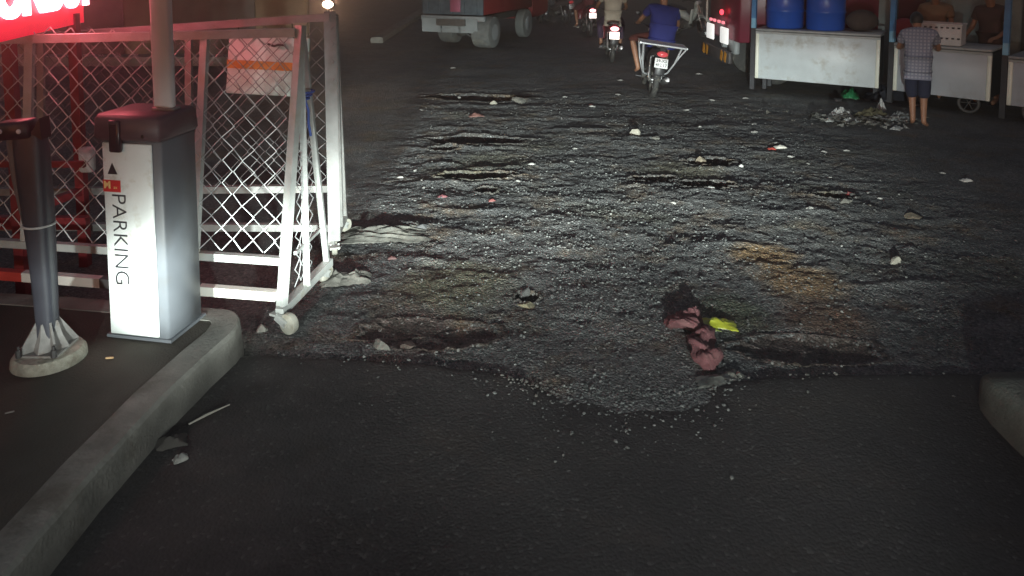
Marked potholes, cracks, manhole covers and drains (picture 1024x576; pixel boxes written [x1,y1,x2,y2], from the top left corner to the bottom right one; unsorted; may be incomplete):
pothole [807,190,861,200]
pothole [627,174,681,183]
pothole [678,155,742,166]
pothole [416,133,536,147]
pothole [431,170,528,181]
pothole [345,316,512,354]
pothole [472,185,500,195]
pothole [416,93,542,104]
pothole [717,332,895,368]
